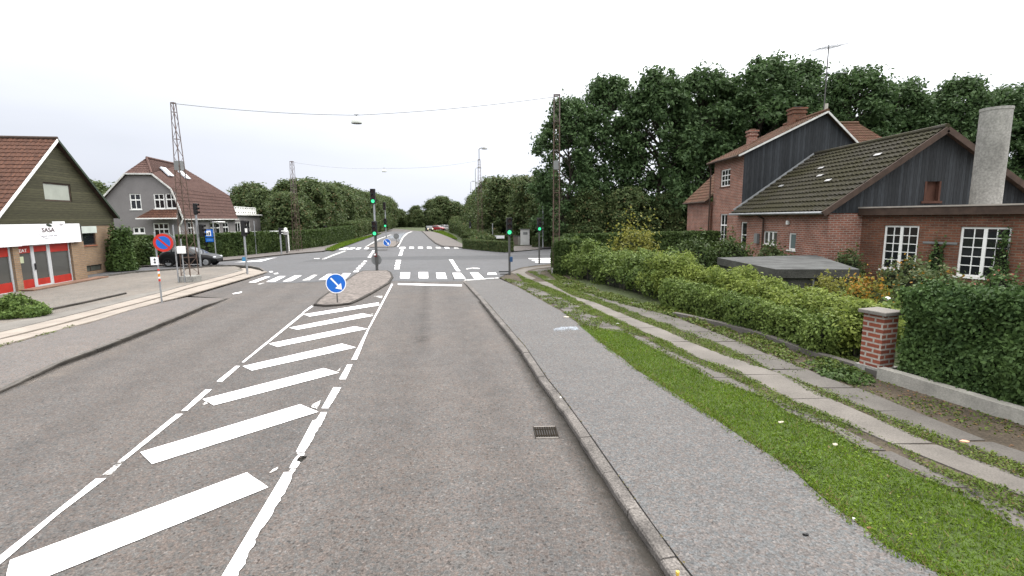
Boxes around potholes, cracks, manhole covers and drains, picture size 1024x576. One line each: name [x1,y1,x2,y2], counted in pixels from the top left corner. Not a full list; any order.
drain grate [533,426,559,439]
